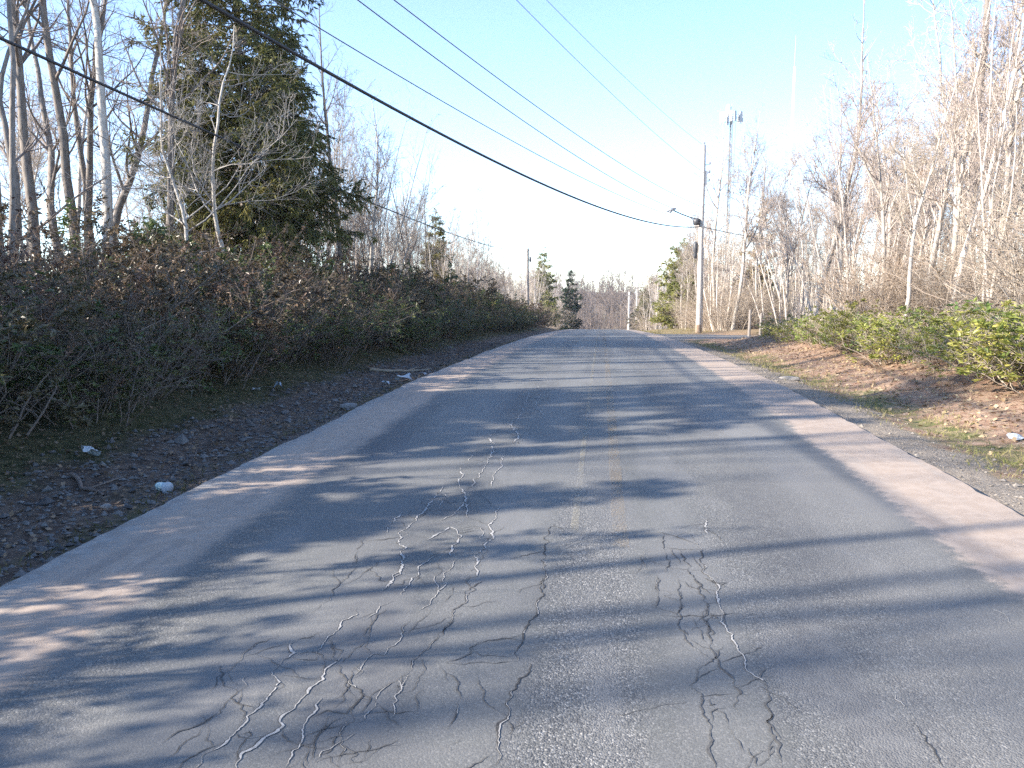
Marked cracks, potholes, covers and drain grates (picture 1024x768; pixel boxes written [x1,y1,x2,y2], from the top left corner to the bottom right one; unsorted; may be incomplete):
crack [611,521,800,768]
crack [894,696,943,767]
crack [447,523,565,768]
